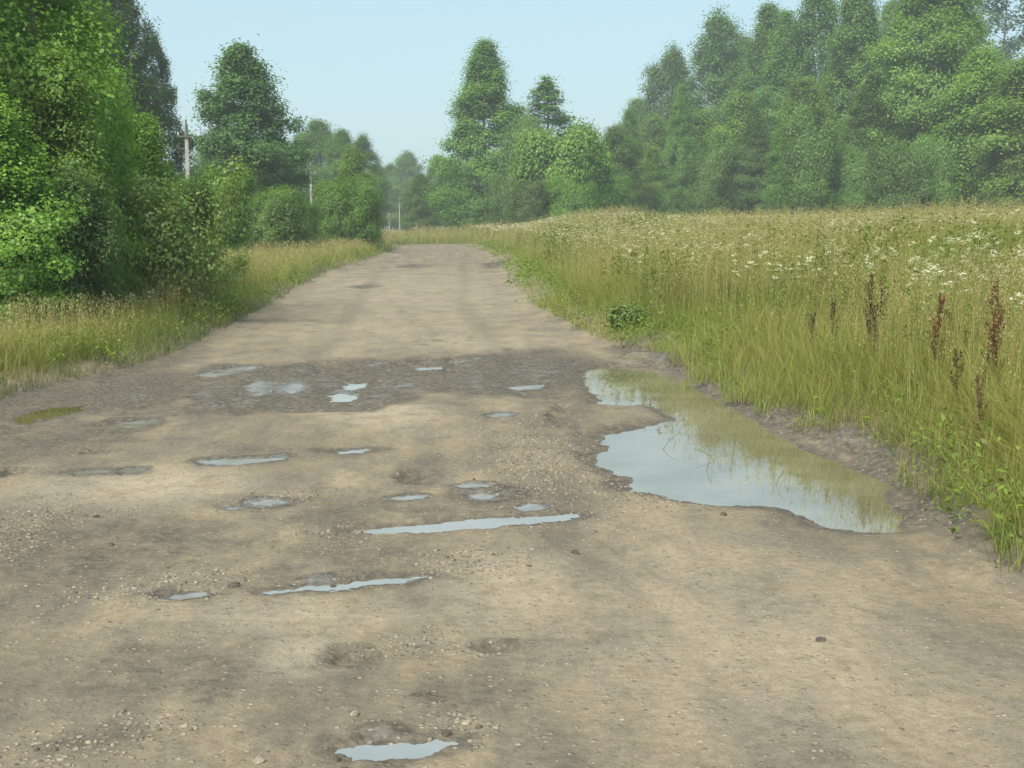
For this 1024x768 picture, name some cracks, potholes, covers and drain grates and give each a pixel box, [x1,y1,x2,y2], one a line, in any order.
pothole [460,490,506,502]
pothole [446,480,503,489]
pothole [110,465,155,475]
pothole [307,728,484,768]
pothole [232,495,300,511]
pothole [309,391,373,404]
pothole [242,570,449,598]
pothole [323,381,381,393]
pothole [309,642,383,671]
pothole [334,509,597,536]
pothole [564,354,947,536]
pothole [234,378,282,397]
